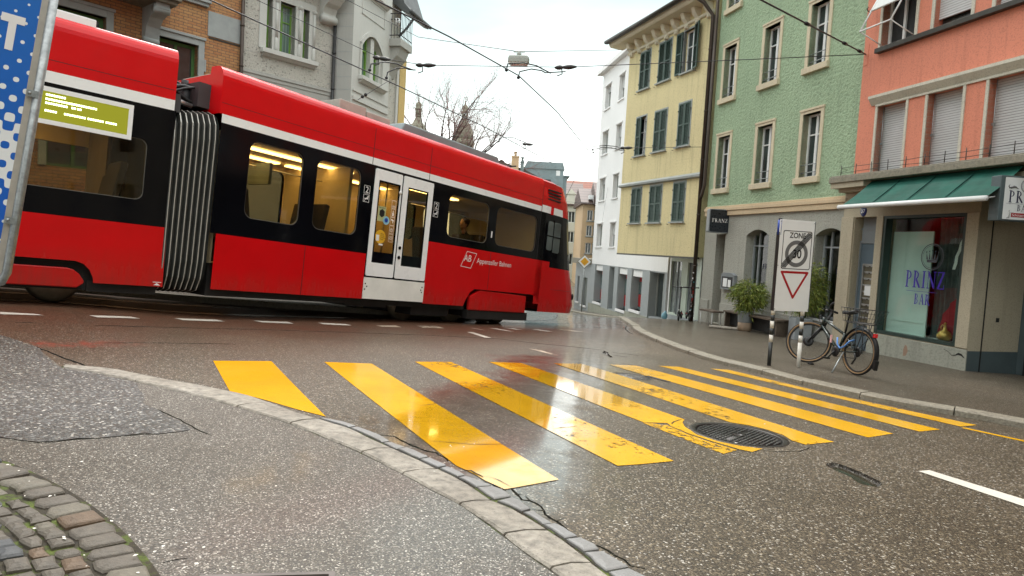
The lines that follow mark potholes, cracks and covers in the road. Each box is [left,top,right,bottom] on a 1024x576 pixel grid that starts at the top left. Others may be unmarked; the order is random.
crack [469,470,645,569]
crack [321,417,465,462]
manhole cover [690,422,790,448]
